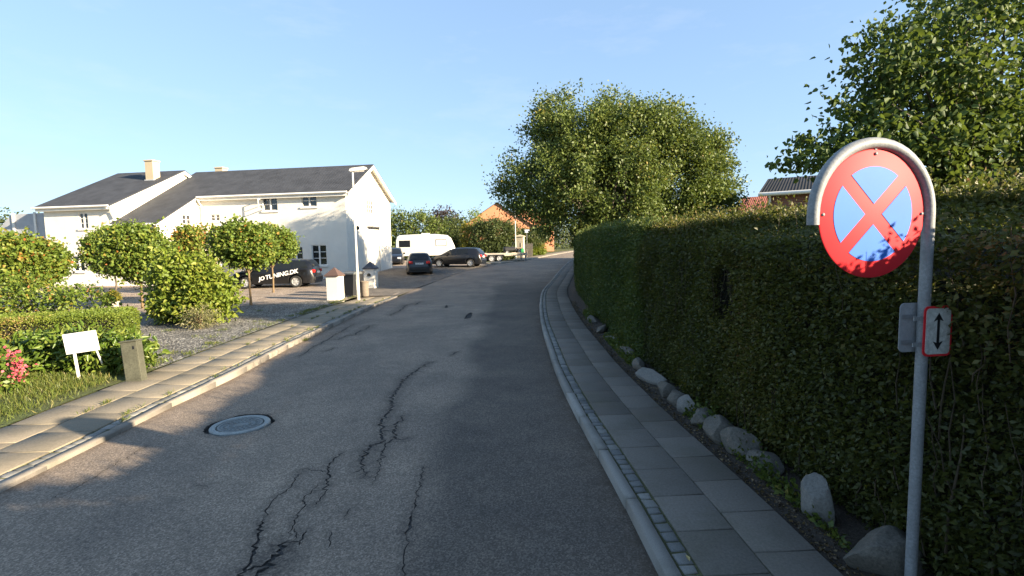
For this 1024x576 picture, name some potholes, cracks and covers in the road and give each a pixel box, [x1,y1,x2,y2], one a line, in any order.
crack [237,452,344,576]
crack [353,352,456,481]
manhole cover [203,414,275,436]
crack [402,467,424,576]
